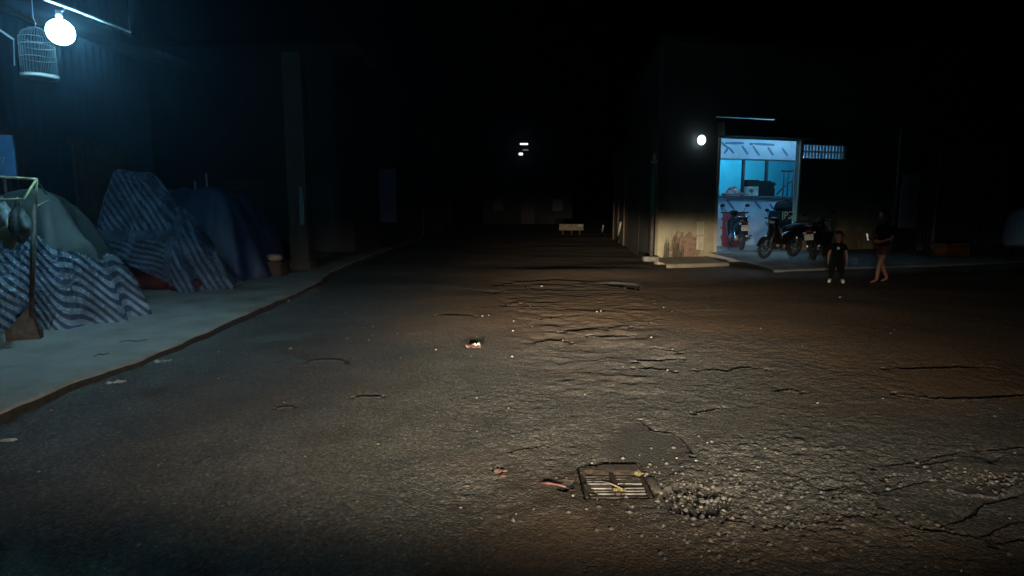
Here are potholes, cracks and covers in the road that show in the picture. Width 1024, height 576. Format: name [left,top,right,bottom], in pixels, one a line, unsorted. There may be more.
crack [897,391,1024,401]
crack [534,315,803,394]
crack [492,280,599,305]
crack [723,447,1024,549]
crack [635,420,697,457]
crack [692,406,728,415]
drain grate [578,465,663,499]
crack [511,445,547,453]
pothole [654,480,736,521]
